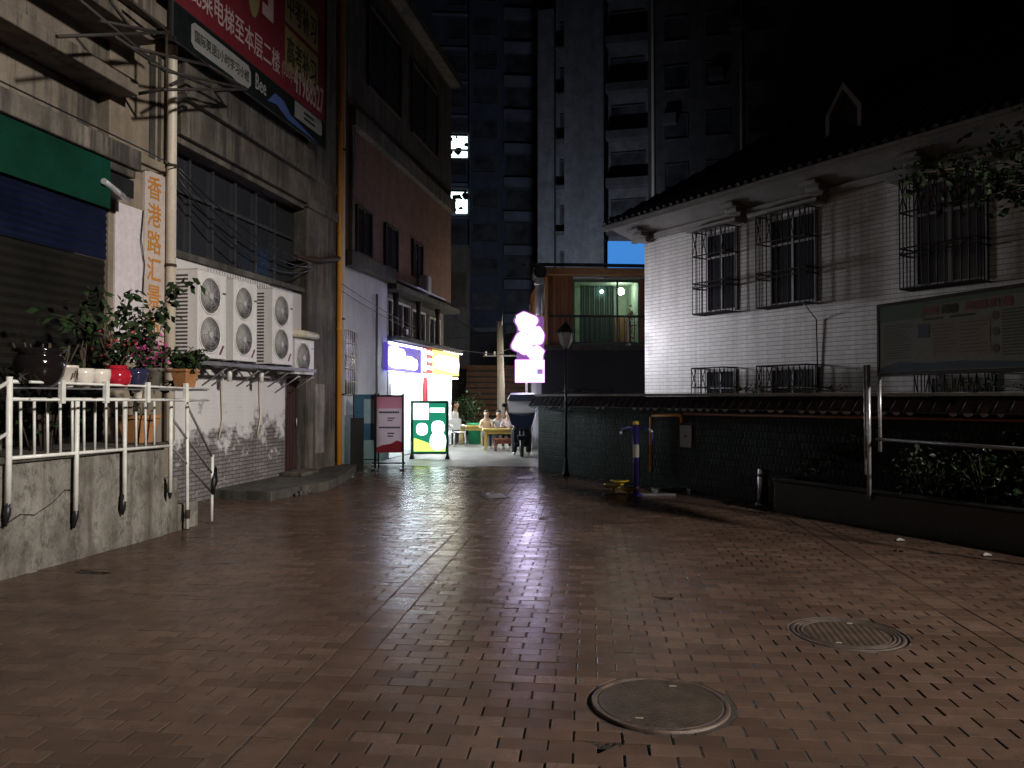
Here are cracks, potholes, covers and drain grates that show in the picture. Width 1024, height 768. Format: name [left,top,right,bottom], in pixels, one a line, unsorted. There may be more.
manhole cover [786,617,912,653]
manhole cover [591,677,734,745]
